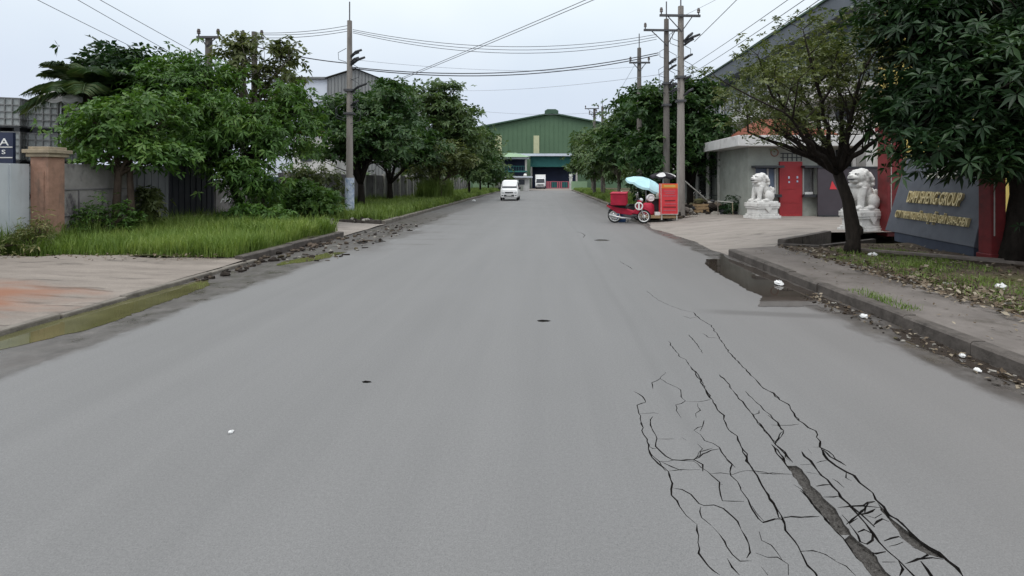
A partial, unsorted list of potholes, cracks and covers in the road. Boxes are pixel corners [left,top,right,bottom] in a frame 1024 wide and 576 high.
crack [637,292,963,576]
